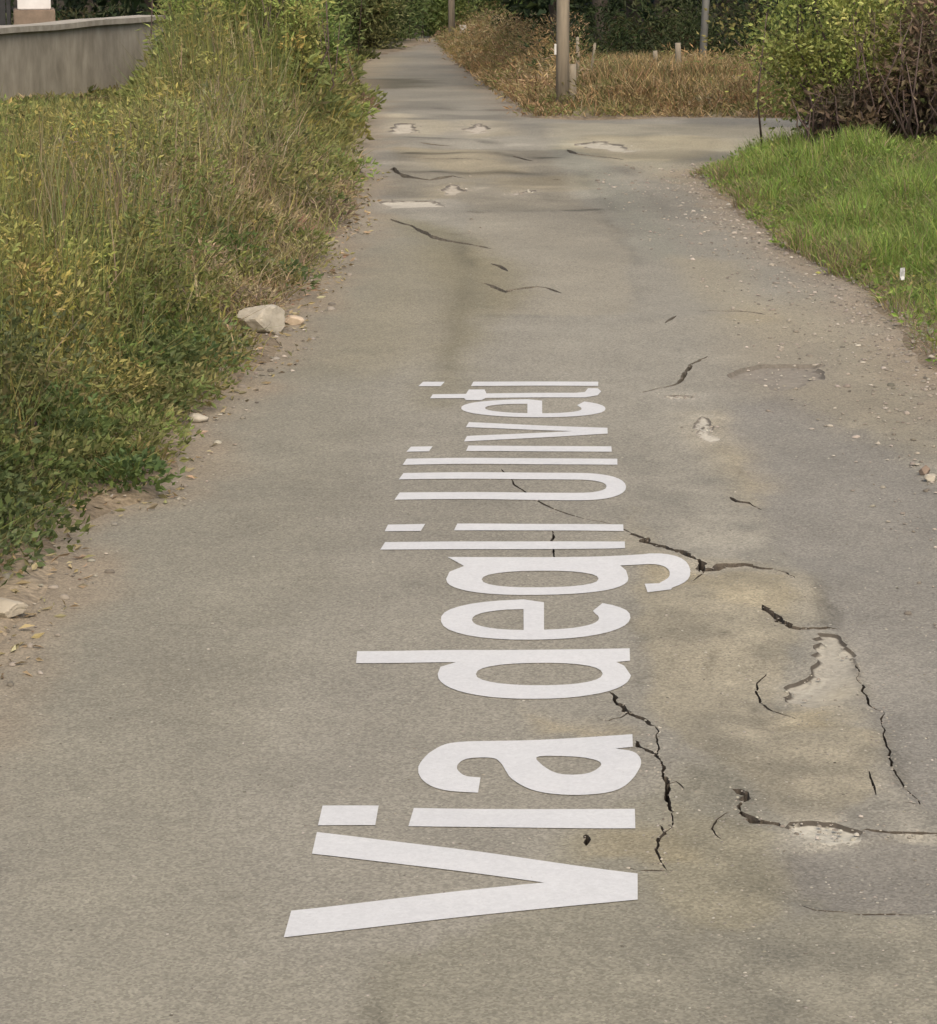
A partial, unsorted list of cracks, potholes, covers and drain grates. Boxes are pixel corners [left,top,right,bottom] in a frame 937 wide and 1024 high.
pothole [575,141,635,153]
crack [855,665,921,805]
crack [711,789,937,840]
pothole [727,364,825,392]
crack [583,692,684,871]
pothole [386,123,419,134]
crack [501,469,795,582]
pothole [441,184,468,195]
crack [798,904,931,915]
pothole [783,633,864,708]
crack [641,356,708,393]
pothole [693,416,720,442]
